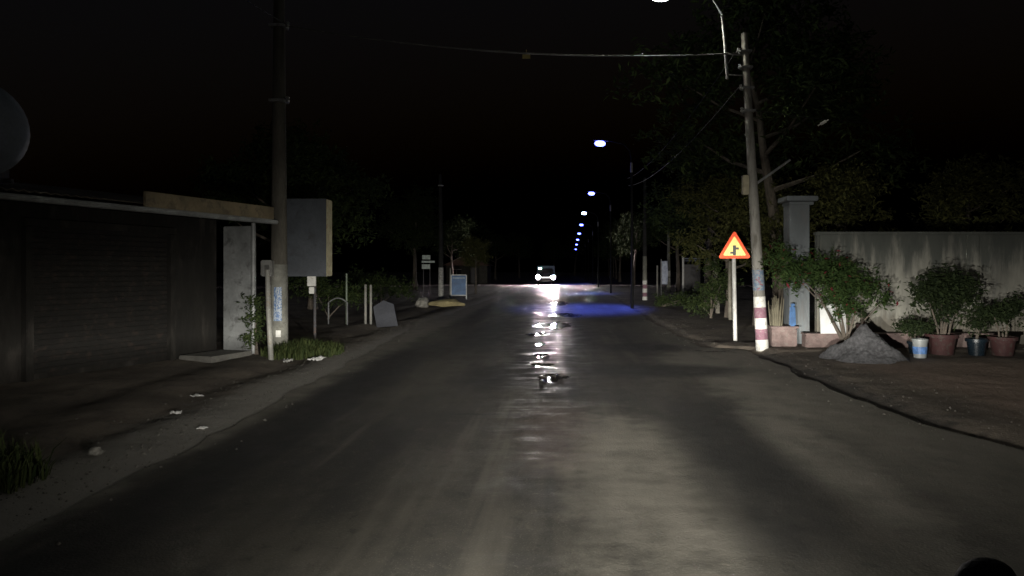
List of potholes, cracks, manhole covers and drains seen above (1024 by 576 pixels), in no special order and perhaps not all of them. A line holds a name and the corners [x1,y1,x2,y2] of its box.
pothole [537,373,571,382]
